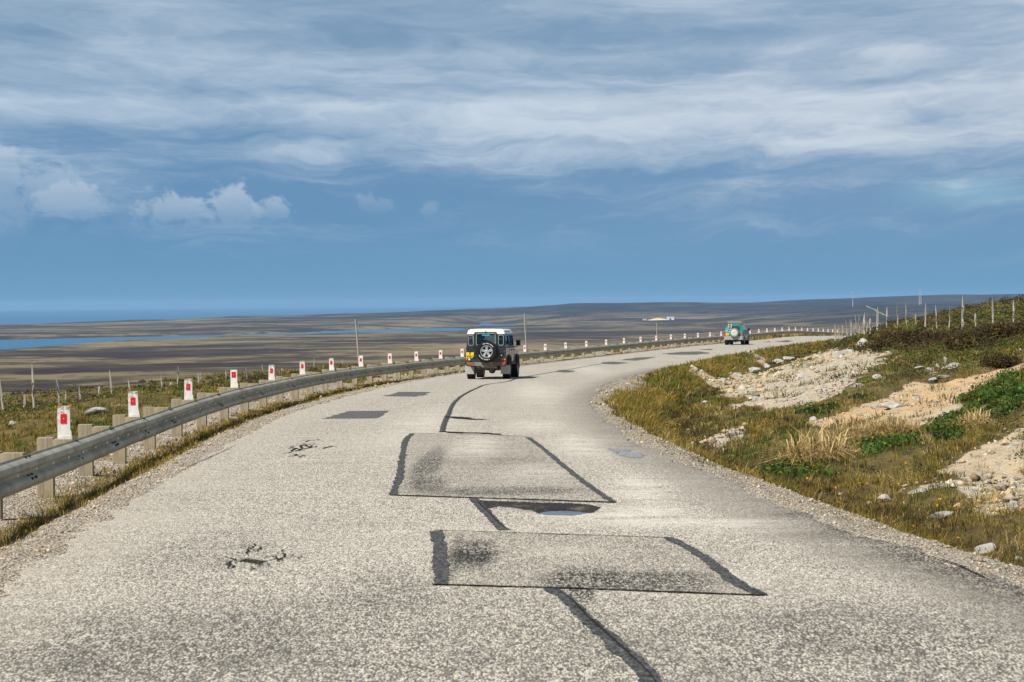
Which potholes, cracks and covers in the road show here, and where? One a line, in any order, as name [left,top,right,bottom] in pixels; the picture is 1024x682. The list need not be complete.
pothole [236,558,268,567]
pothole [480,500,600,529]
